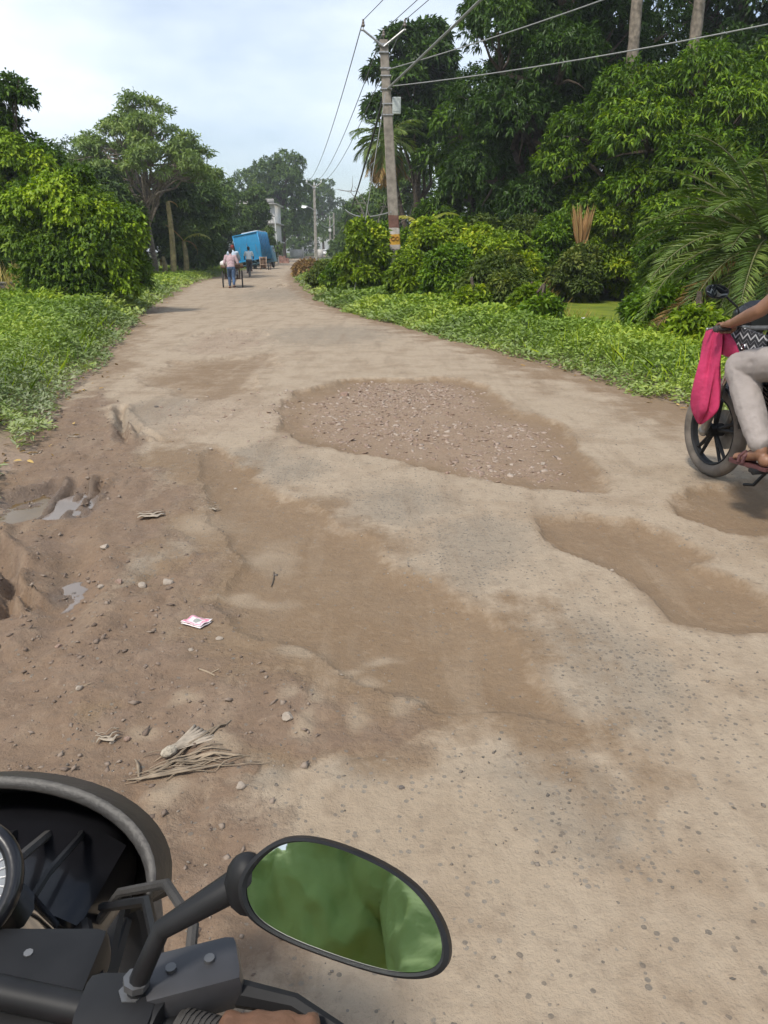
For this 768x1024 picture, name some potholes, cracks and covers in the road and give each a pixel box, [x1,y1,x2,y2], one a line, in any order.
pothole [0,475,108,523]
pothole [271,376,613,493]
pothole [534,512,768,636]
pothole [666,477,768,536]
pothole [197,446,574,727]
